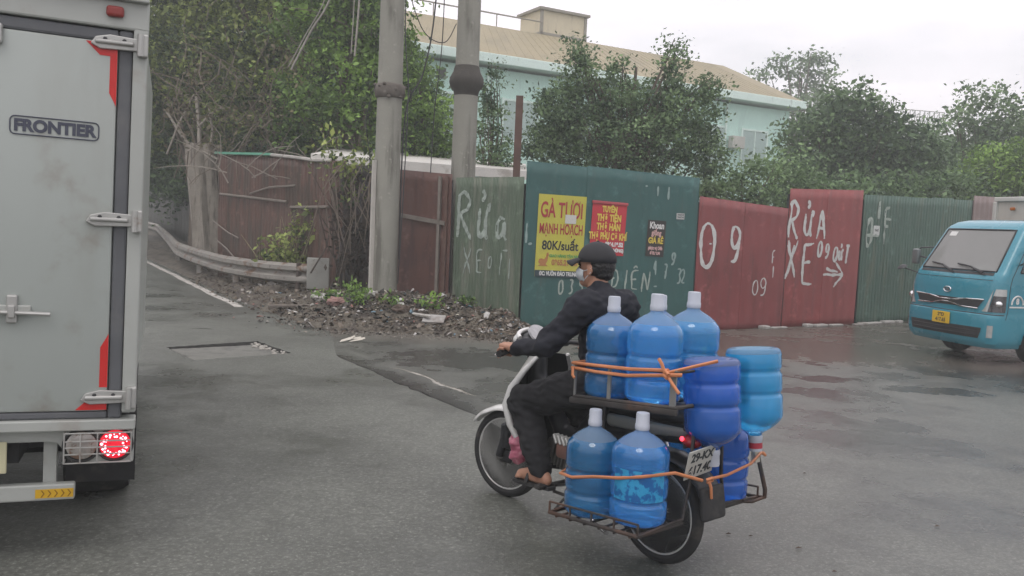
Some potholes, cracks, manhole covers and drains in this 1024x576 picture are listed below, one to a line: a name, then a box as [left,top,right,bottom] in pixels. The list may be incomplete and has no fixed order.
manhole cover [167,341,290,360]
